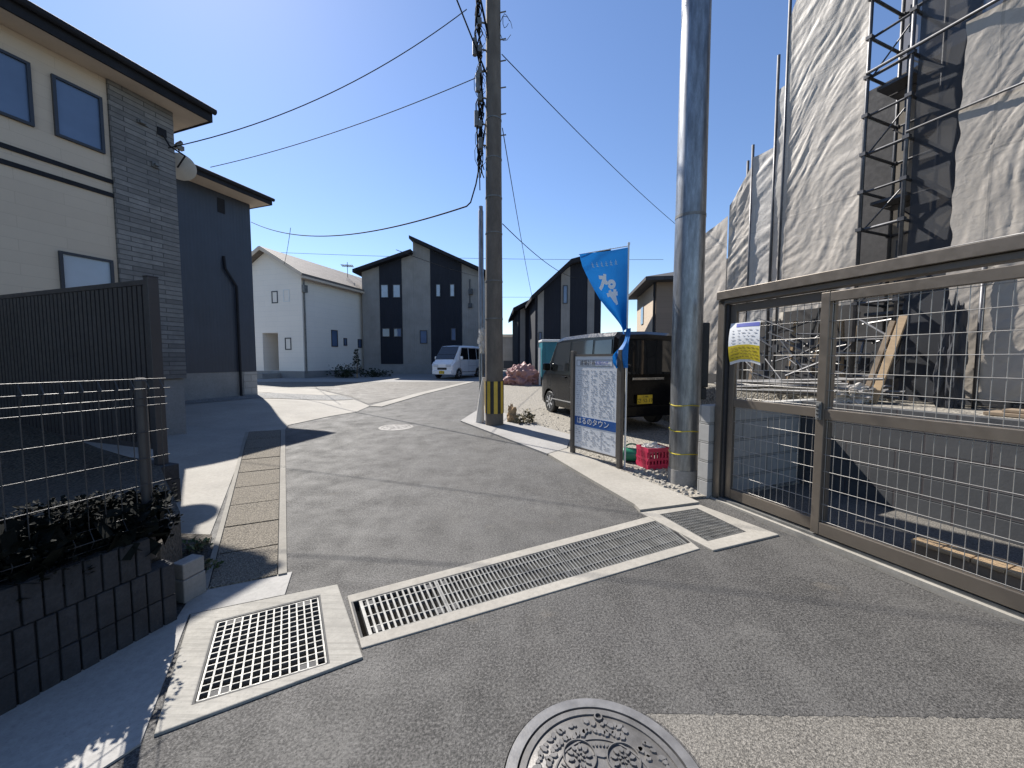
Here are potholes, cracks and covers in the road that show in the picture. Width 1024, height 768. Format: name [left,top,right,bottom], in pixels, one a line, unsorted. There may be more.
drain grate [347,517,700,649]
manhole cover [505,698,699,768]
drain grate [640,505,779,552]
drain grate [154,584,363,737]
